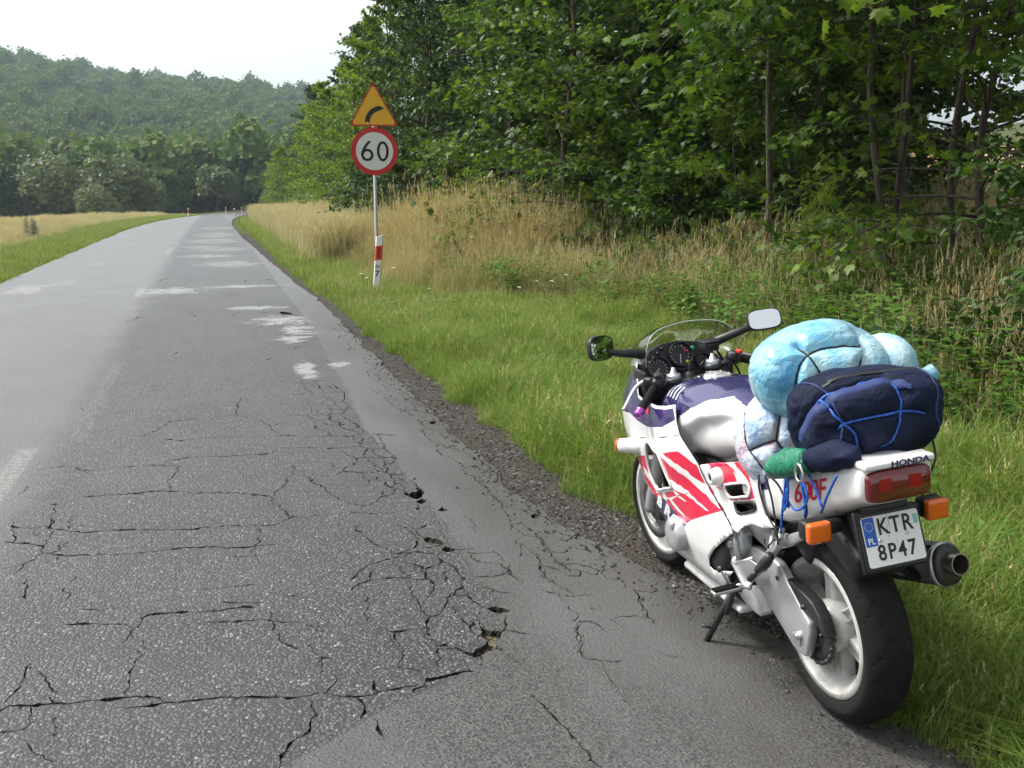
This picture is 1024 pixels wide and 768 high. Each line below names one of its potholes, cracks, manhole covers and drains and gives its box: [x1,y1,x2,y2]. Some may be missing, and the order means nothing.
pothole [463,625,501,658]
crack [0,386,673,767]
pothole [404,489,425,499]
pothole [424,537,444,546]
